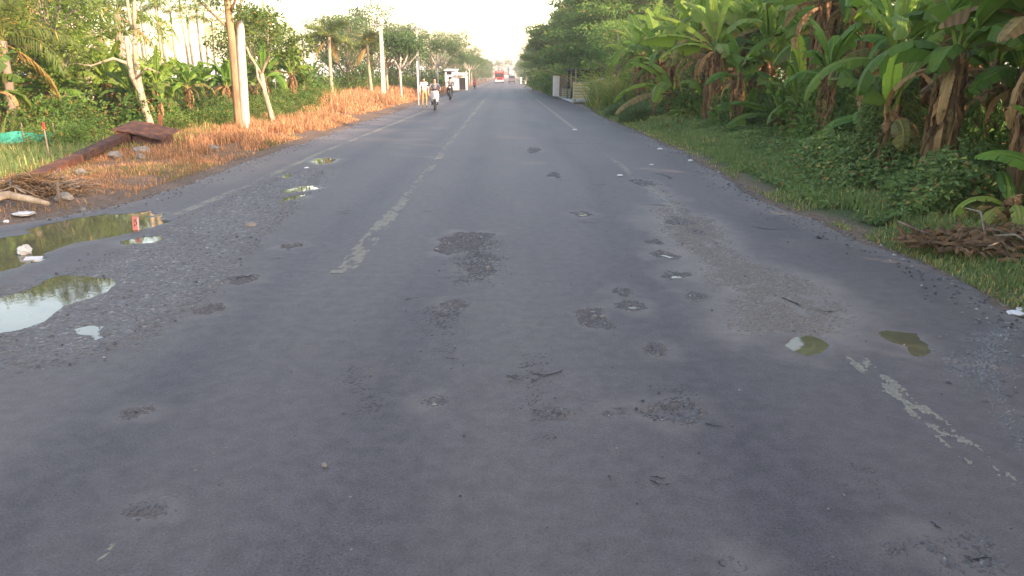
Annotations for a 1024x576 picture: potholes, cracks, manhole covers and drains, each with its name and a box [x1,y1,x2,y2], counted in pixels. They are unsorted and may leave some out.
pothole [572,308,617,331]
pothole [530,406,576,422]
pothole [624,401,710,427]
pothole [612,286,634,297]
pothole [611,299,648,313]
pothole [442,298,470,310]
pothole [649,249,682,260]
pothole [119,402,166,420]
pothole [433,232,496,255]
pothole [226,275,259,285]
pothole [640,342,674,357]
pothole [121,496,177,522]
